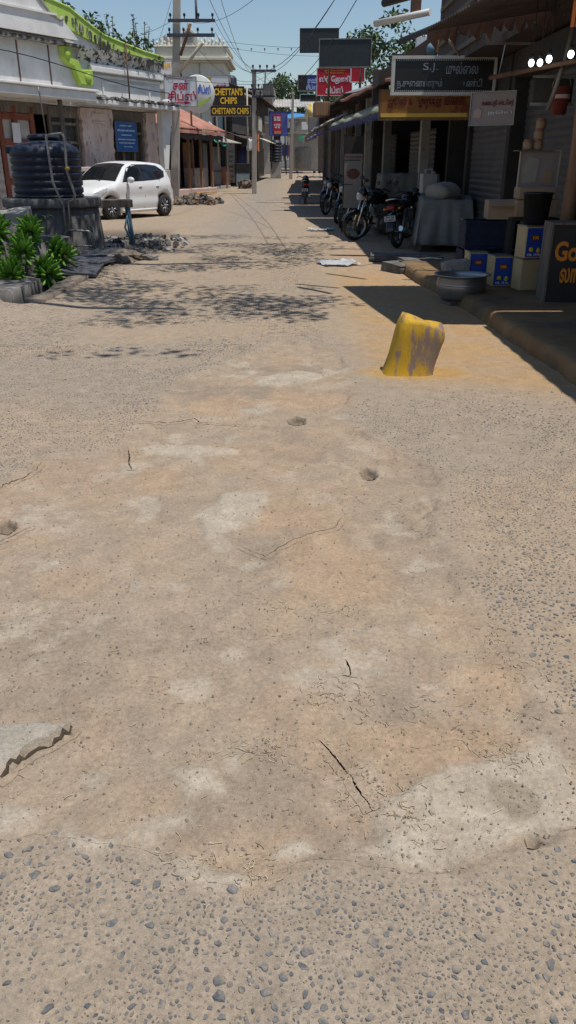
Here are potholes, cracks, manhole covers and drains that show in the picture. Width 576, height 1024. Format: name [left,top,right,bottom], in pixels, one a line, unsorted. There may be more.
crack [237,516,347,559]
crack [312,734,381,815]
crack [123,447,136,470]
crack [132,417,256,427]
crack [0,461,46,493]
crack [339,657,358,677]
